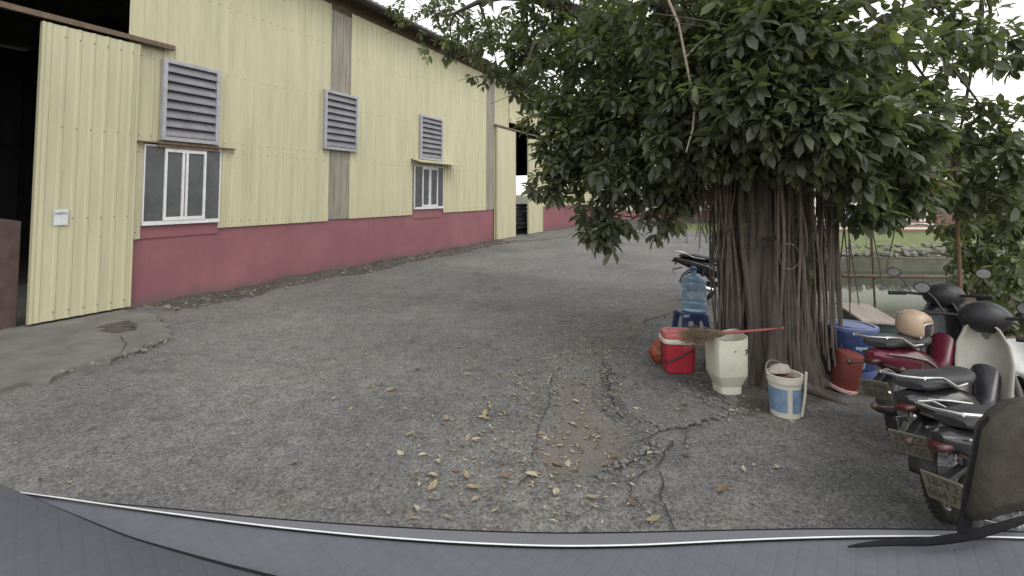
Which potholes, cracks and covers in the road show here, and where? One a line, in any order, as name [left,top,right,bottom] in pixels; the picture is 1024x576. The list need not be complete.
crack [586,360,755,531]
crack [518,378,553,485]
